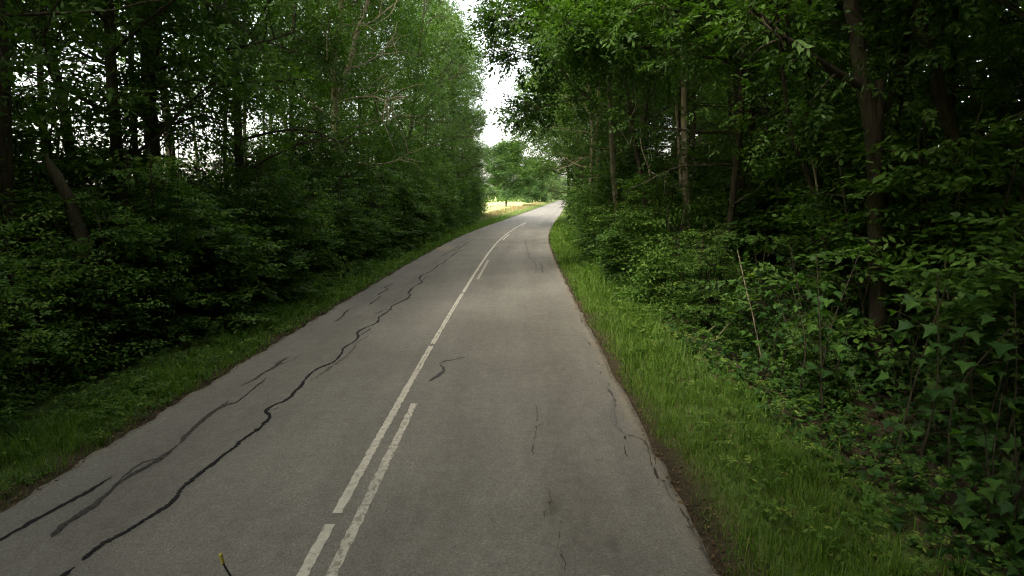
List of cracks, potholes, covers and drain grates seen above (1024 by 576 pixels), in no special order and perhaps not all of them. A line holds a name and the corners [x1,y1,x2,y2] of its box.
crack [543,487,566,570]
